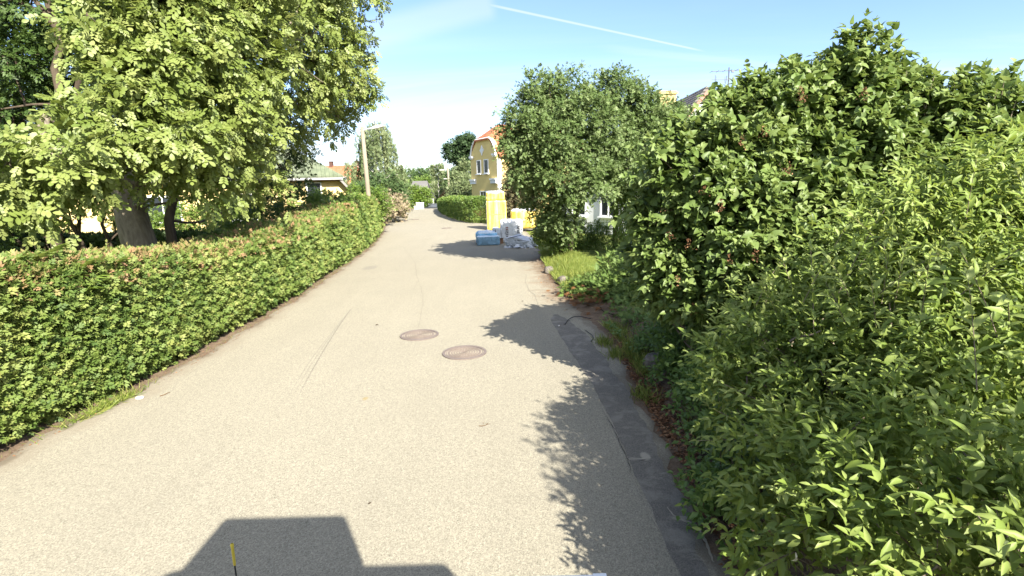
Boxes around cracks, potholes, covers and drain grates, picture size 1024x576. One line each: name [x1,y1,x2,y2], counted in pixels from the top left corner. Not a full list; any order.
manhole cover [400,329,439,341]
manhole cover [442,345,487,360]
